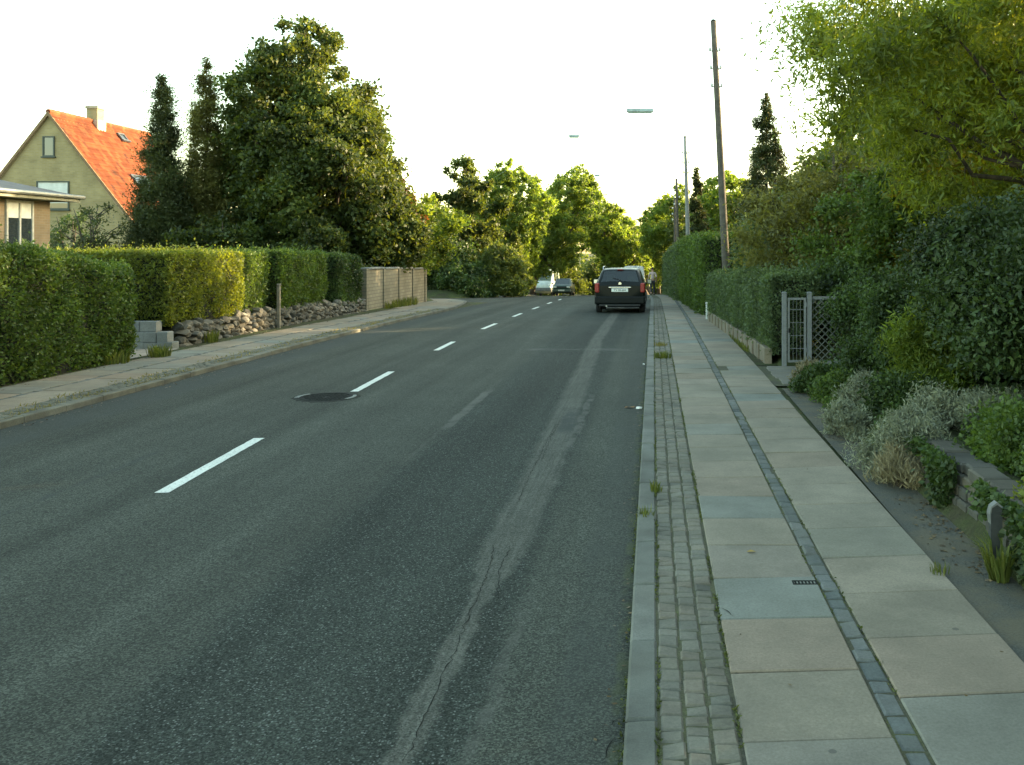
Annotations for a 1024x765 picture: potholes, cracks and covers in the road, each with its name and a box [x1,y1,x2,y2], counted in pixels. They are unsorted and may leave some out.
crack [403,545,509,760]
manhole cover [291,392,361,403]
